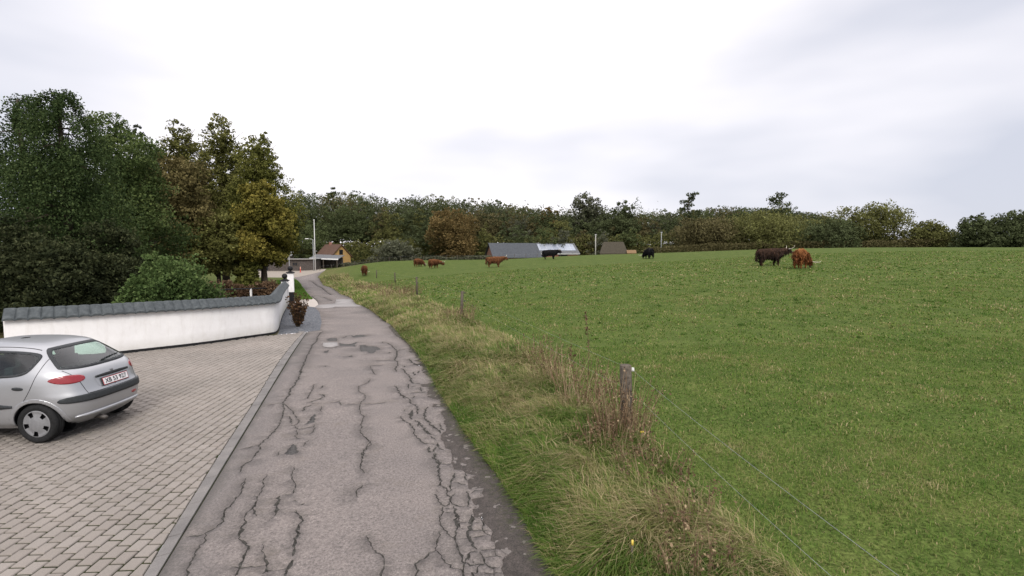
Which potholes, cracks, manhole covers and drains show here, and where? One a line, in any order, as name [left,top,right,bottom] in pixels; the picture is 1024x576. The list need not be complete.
crack [355,342,501,576]
crack [186,331,347,576]
